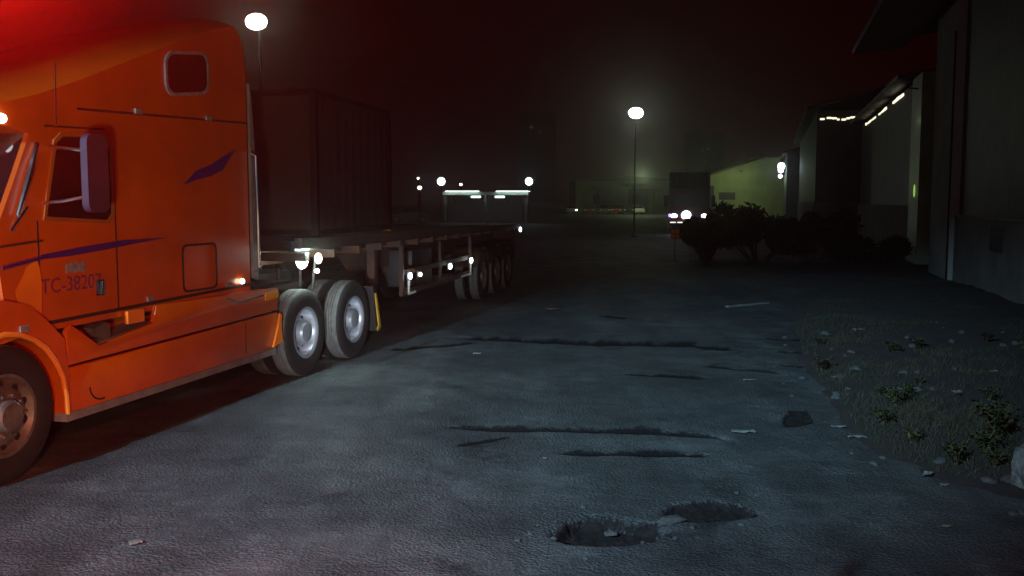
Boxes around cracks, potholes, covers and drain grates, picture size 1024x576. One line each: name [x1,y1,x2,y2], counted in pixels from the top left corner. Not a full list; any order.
crack [450,426,724,457]
crack [392,337,802,379]
pothole [555,515,666,547]
pothole [662,499,761,524]
